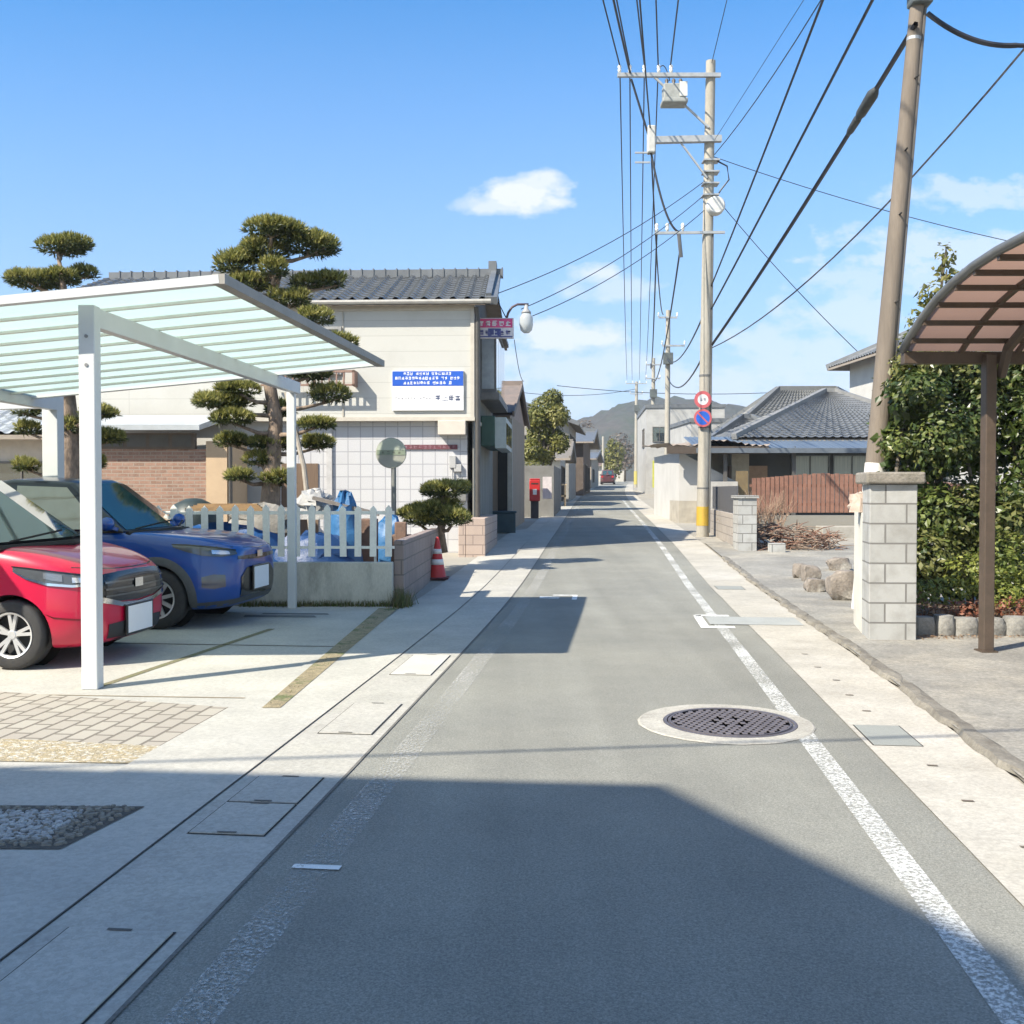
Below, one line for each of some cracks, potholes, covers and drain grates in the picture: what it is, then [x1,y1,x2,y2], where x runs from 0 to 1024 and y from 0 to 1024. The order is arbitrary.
manhole cover [637,704,816,745]
